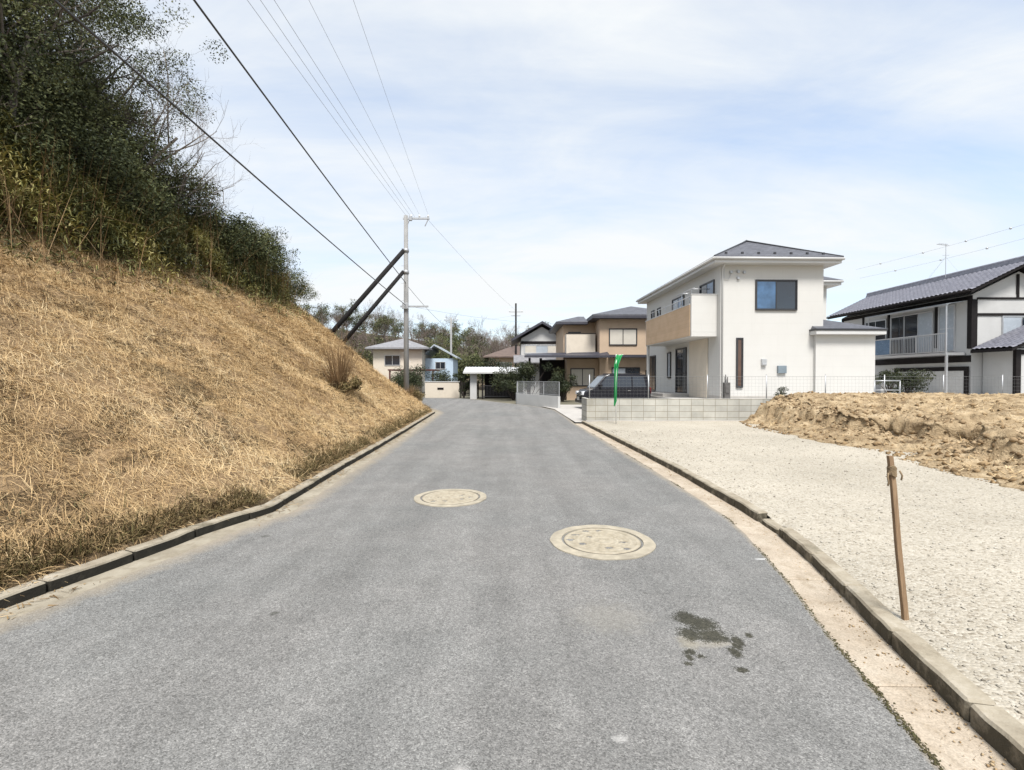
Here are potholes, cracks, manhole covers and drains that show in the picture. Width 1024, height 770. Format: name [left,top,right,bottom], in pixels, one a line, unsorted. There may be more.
manhole cover [550,525,656,560]
manhole cover [414,489,486,507]
